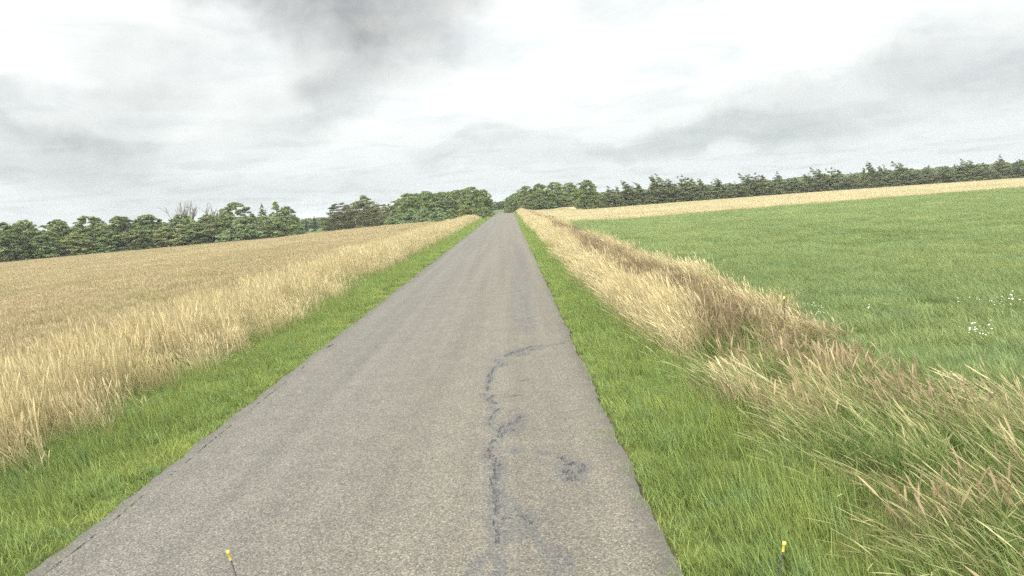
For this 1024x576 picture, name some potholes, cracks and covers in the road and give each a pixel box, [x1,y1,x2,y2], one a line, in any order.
crack [483,341,567,543]
